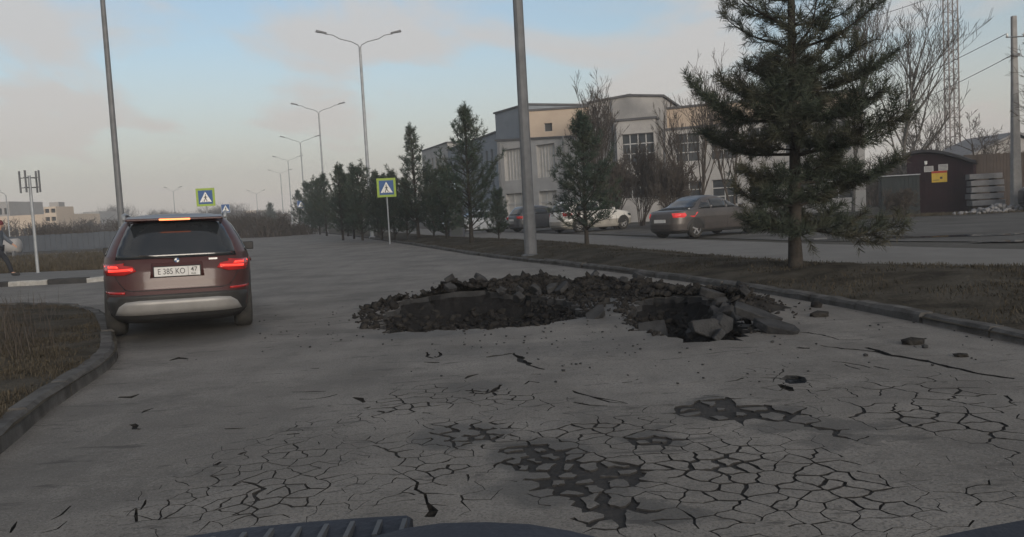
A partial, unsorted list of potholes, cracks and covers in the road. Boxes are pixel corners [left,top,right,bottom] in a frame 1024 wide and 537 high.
pothole [378,290,583,334]
pothole [623,296,754,343]
crack [102,332,1024,537]
